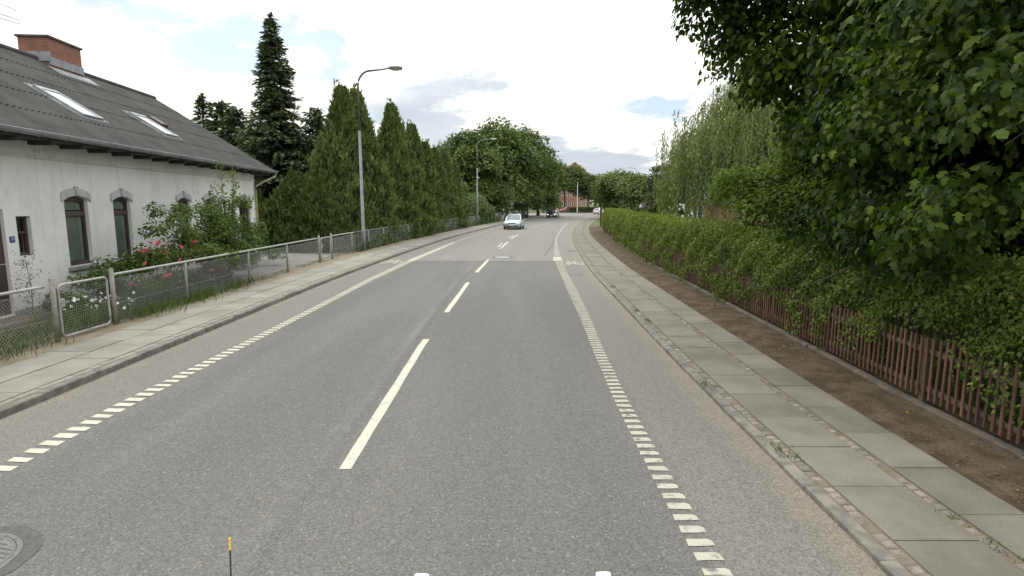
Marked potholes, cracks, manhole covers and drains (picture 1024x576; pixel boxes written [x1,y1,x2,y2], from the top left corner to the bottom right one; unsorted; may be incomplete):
manhole cover [0,525,43,576]
